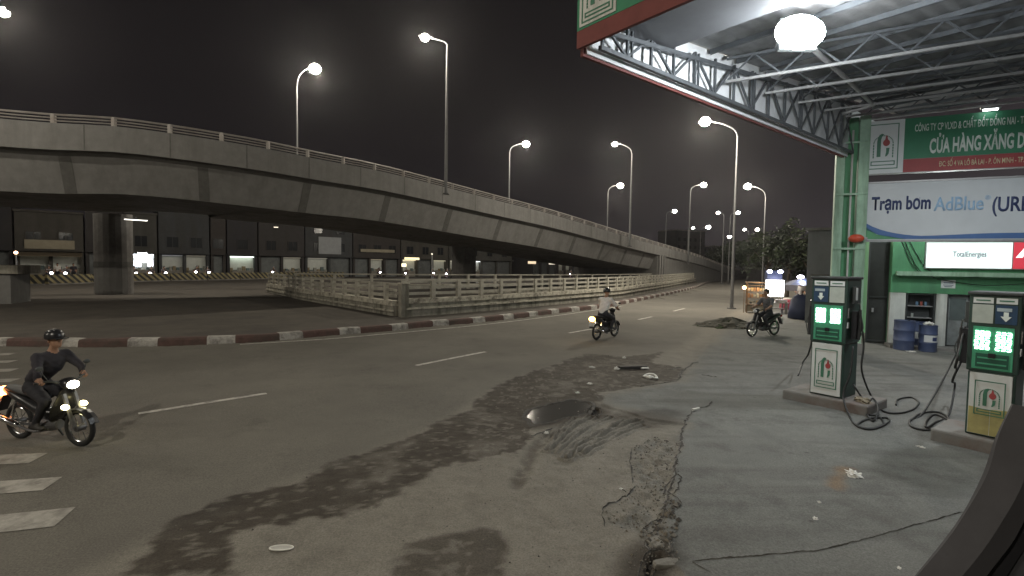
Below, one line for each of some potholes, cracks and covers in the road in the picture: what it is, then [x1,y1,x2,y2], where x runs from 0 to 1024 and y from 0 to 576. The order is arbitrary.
crack [602,401,713,552]
crack [692,511,964,572]
pothole [521,398,596,426]
